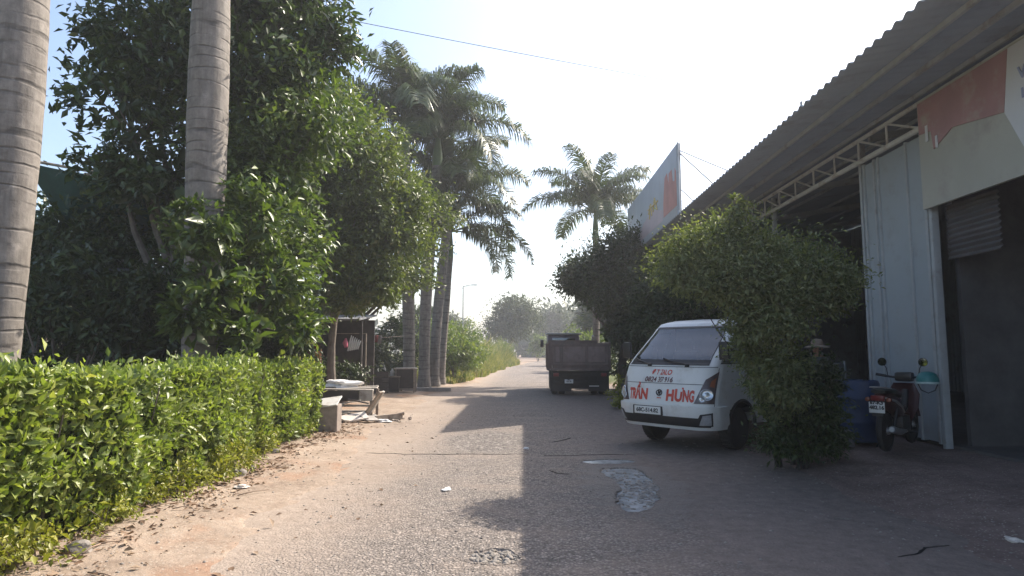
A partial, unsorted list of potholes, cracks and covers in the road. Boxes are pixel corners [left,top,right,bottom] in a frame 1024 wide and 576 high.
crack [898,545,950,557]
pothole [599,467,663,513]
pothole [464,547,525,565]
